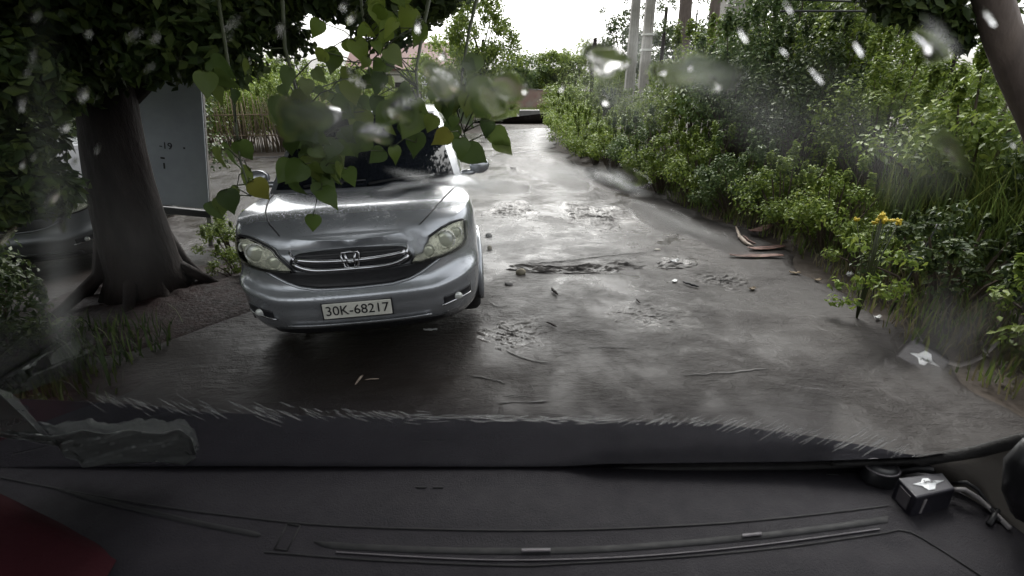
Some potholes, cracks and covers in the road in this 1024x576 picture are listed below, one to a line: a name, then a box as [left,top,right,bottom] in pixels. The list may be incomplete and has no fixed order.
pothole [472,316,544,355]
pothole [690,272,752,293]
pothole [506,261,647,274]
pothole [481,200,540,221]
pothole [656,261,698,269]
pothole [559,202,638,235]
